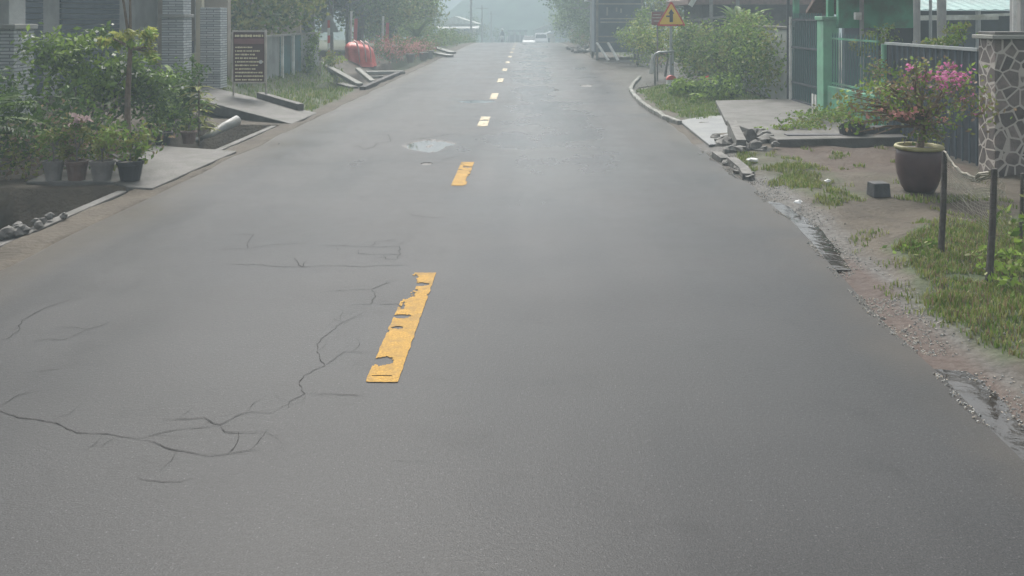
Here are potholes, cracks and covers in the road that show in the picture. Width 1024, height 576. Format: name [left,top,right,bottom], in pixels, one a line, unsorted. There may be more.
crack [288,314,373,406]
crack [8,300,106,341]
crack [242,235,405,304]
pothole [403,139,457,152]
crack [0,392,293,464]
